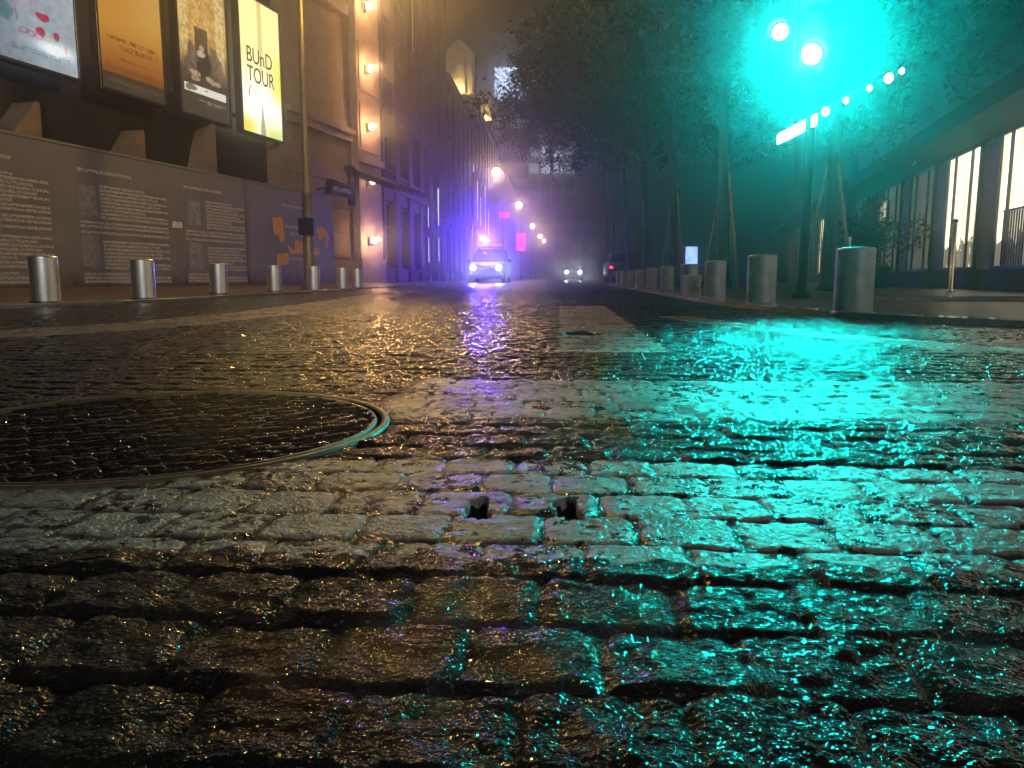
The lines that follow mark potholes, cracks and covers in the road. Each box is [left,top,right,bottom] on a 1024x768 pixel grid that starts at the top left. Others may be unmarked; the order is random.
manhole cover [0,390,390,490]
